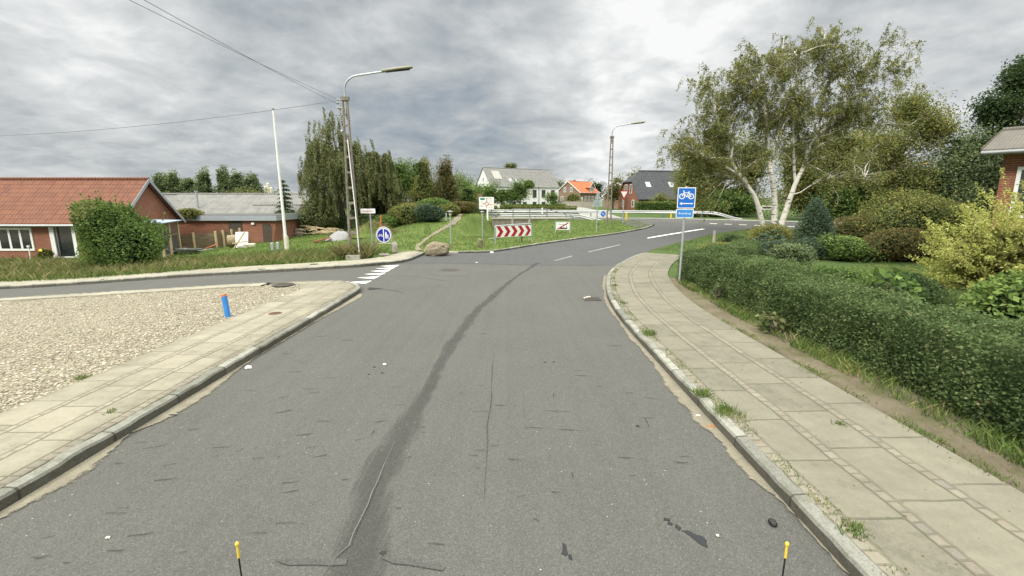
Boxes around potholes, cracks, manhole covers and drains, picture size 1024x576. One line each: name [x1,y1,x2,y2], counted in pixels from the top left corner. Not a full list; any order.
crack [473,355,519,499]
